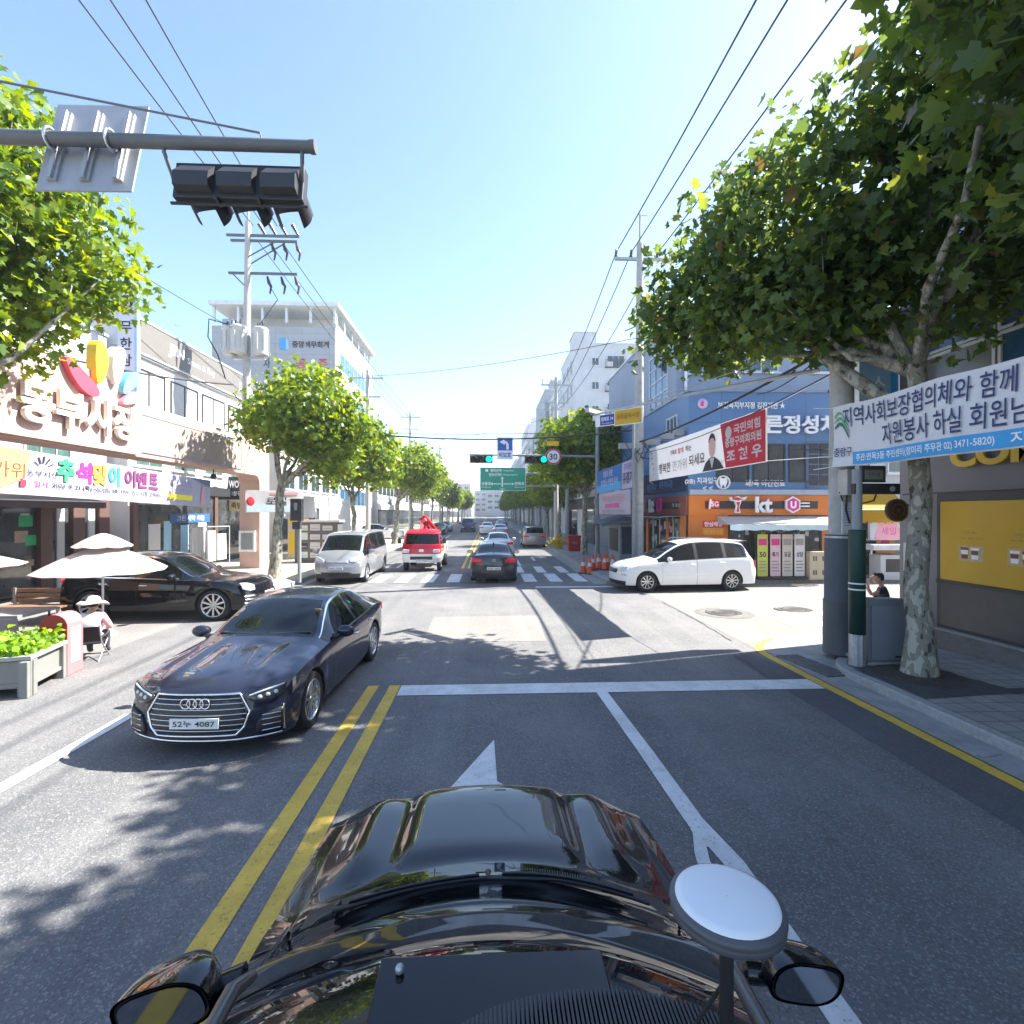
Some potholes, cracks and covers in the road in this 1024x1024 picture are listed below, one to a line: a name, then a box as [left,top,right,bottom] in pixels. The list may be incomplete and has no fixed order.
manhole cover [694,608,755,619]
